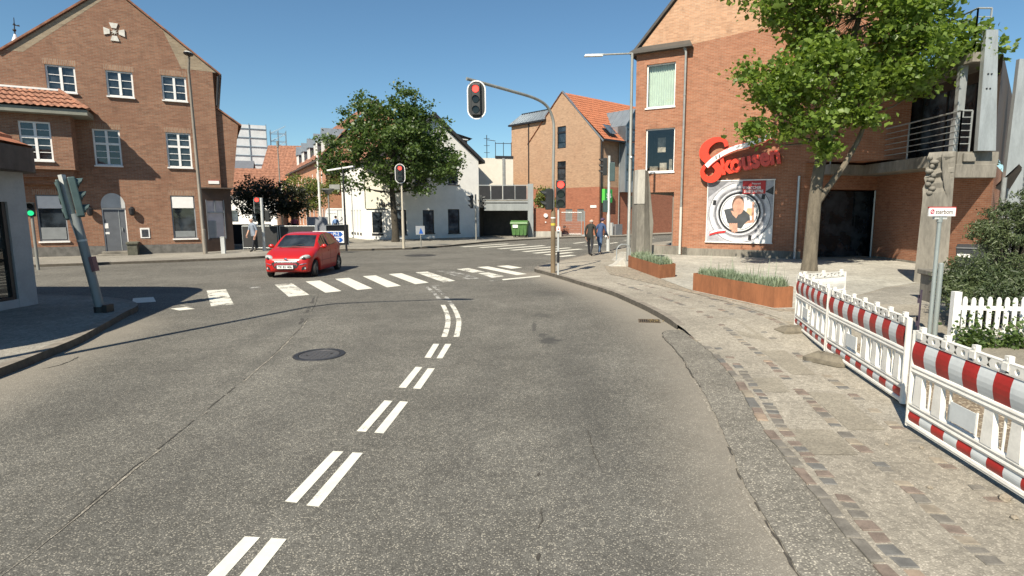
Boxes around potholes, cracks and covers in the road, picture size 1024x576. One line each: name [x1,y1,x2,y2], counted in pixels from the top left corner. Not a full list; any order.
manhole cover [292,348,346,361]
